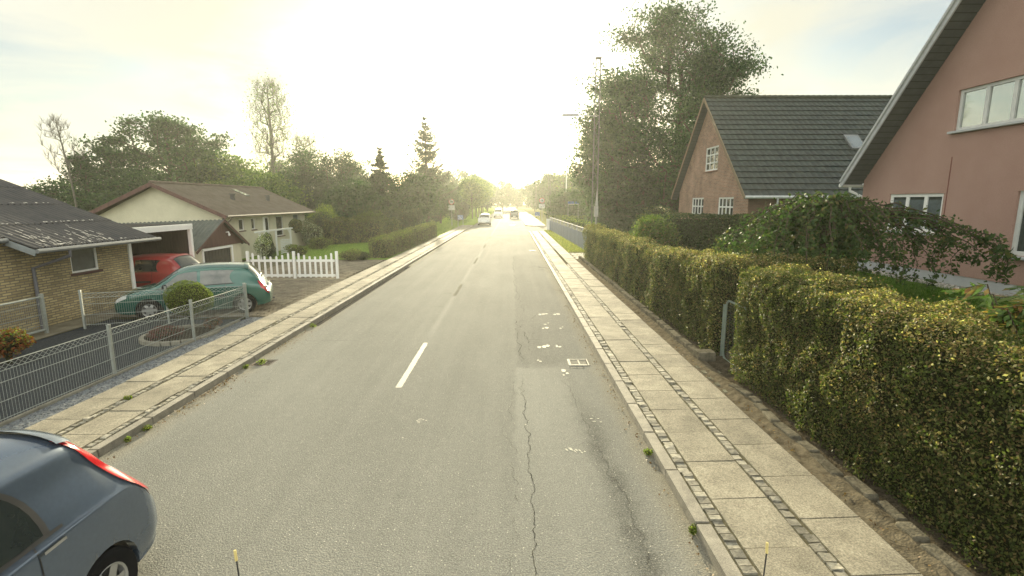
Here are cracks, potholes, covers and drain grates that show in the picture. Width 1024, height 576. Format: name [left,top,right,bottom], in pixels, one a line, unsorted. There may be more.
crack [501,375,537,575]
